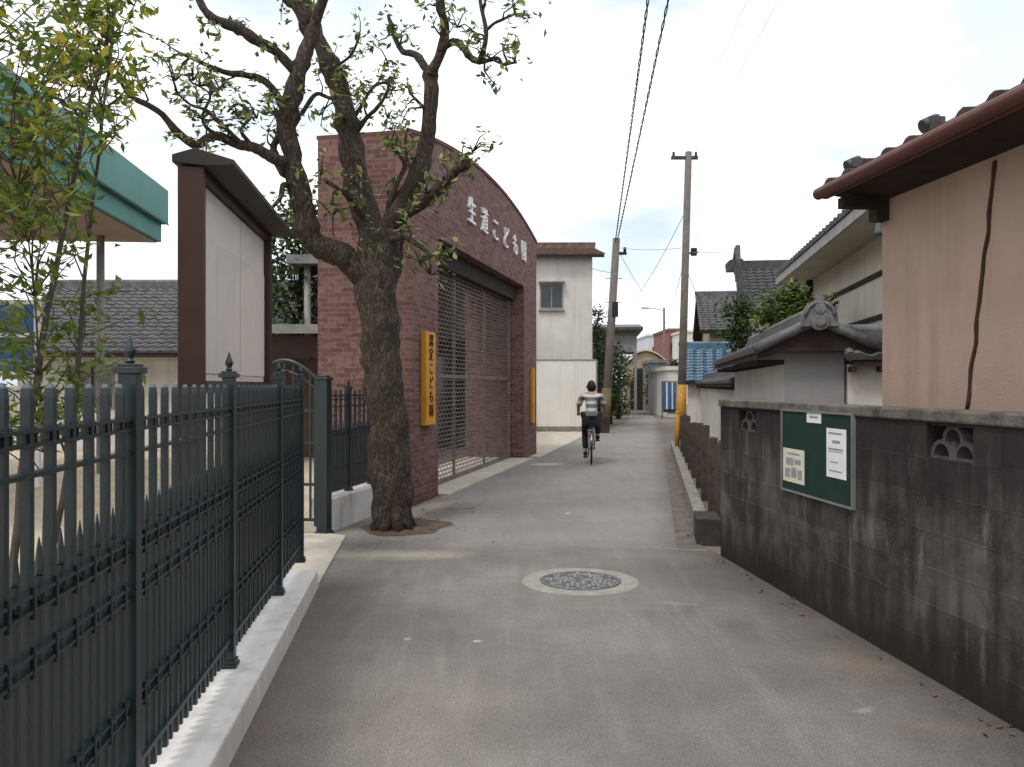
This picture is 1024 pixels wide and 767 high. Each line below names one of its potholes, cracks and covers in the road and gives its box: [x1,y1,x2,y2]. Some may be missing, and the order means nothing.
manhole cover [522,568,639,596]
